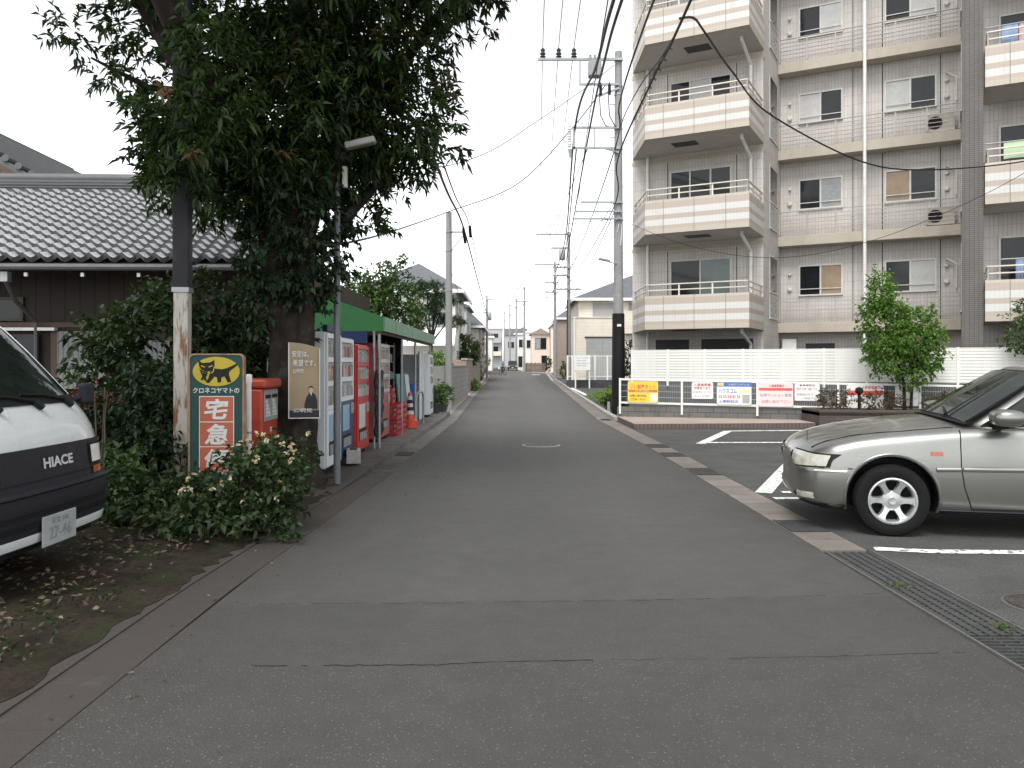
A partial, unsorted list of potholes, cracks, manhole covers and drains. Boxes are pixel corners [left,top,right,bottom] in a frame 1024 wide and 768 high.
manhole cover [1000,593,1024,611]
drain grate [824,551,938,587]
crack [255,652,960,666]
drain grate [882,585,1024,637]
